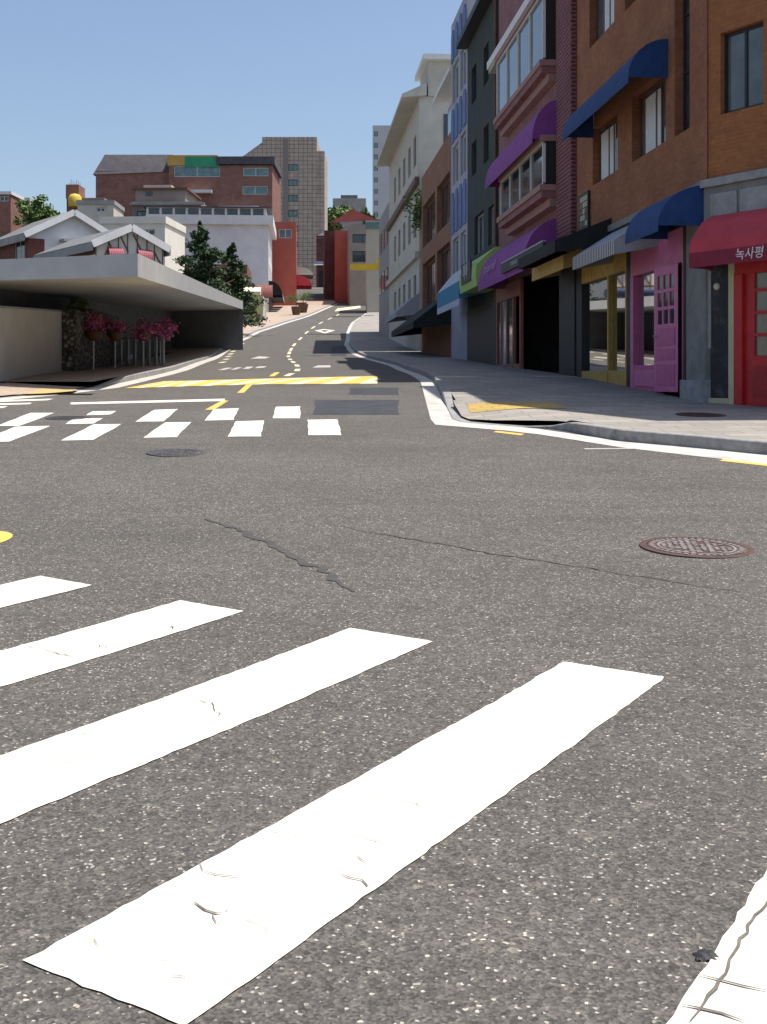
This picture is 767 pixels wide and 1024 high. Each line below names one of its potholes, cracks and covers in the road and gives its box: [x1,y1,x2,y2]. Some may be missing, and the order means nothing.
crack [204,518,355,592]
crack [328,523,744,592]
manhole cover [639,537,755,559]
manhole cover [146,449,209,457]
crack [180,863,269,931]
